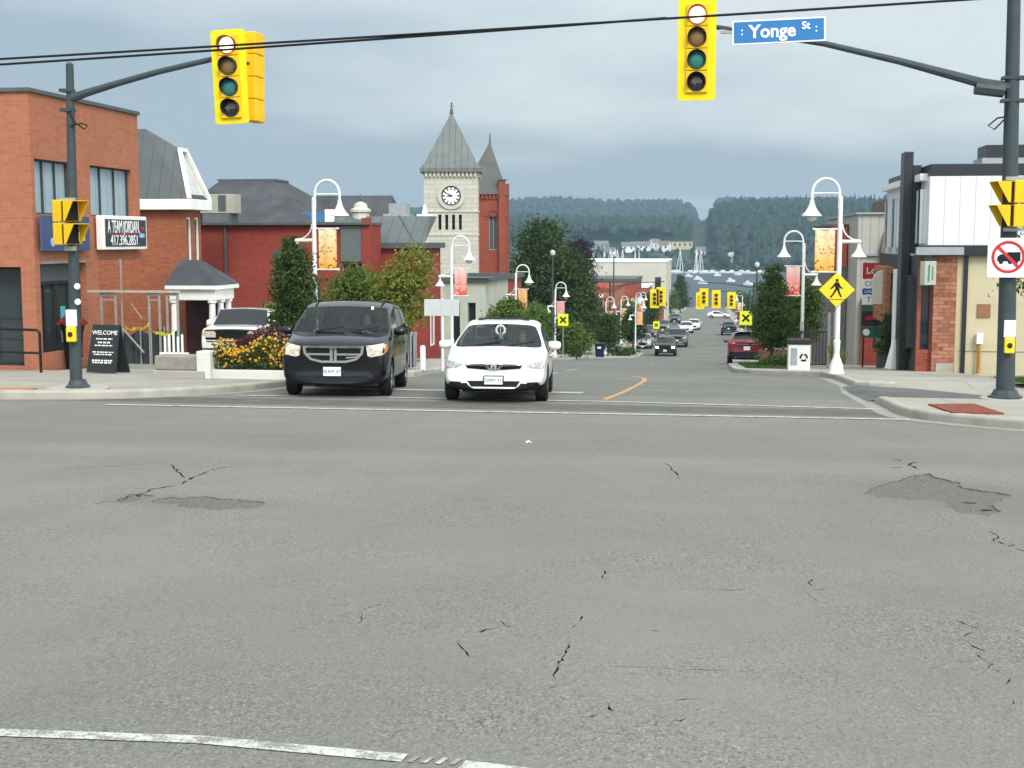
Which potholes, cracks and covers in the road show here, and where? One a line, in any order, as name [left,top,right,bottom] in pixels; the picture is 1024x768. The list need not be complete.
crack [551,570,612,719]
crack [63,463,230,504]
crack [957,620,1014,705]
crack [457,621,516,657]
